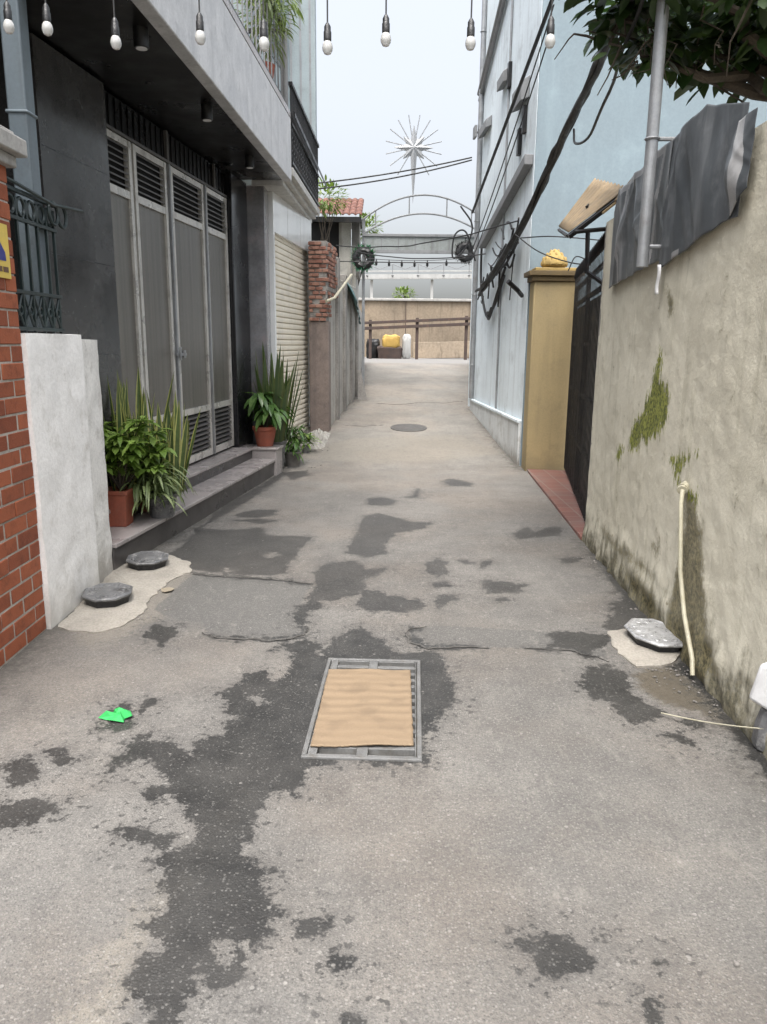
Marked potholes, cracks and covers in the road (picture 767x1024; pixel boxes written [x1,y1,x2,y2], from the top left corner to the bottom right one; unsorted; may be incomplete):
manhole cover [82,582,133,608]
manhole cover [126,550,169,571]
manhole cover [391,424,427,432]
manhole cover [624,618,683,652]
